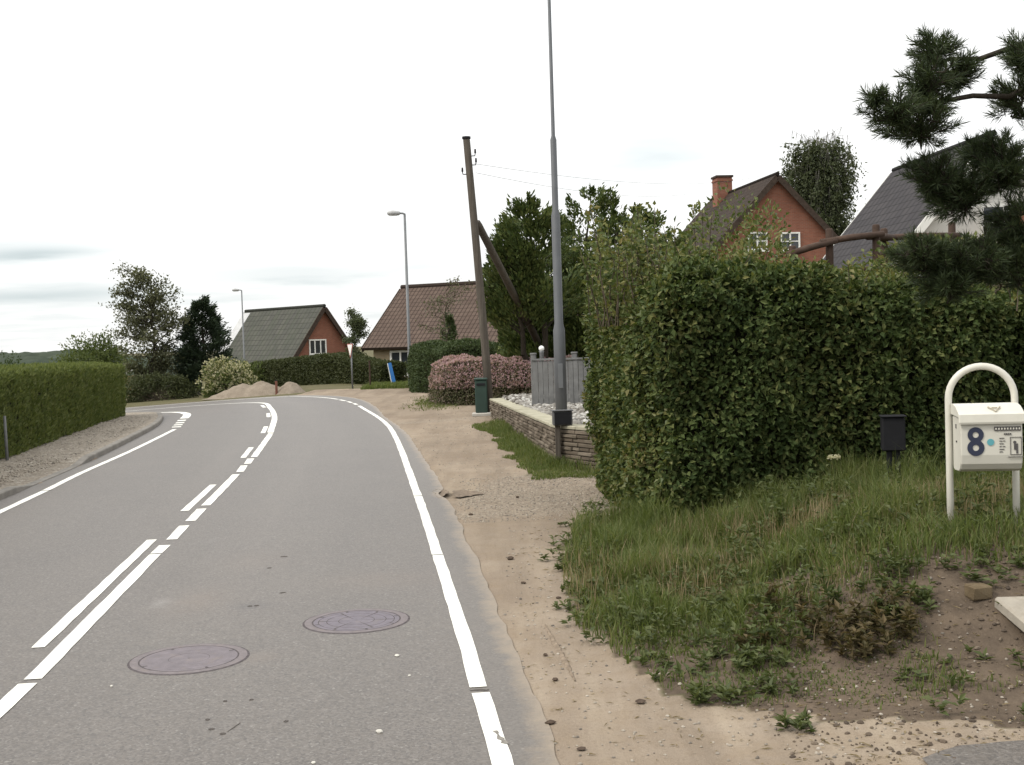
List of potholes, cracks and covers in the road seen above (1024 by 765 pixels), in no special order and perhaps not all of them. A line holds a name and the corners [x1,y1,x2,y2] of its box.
manhole cover [127,644,250,675]
manhole cover [302,609,410,634]
